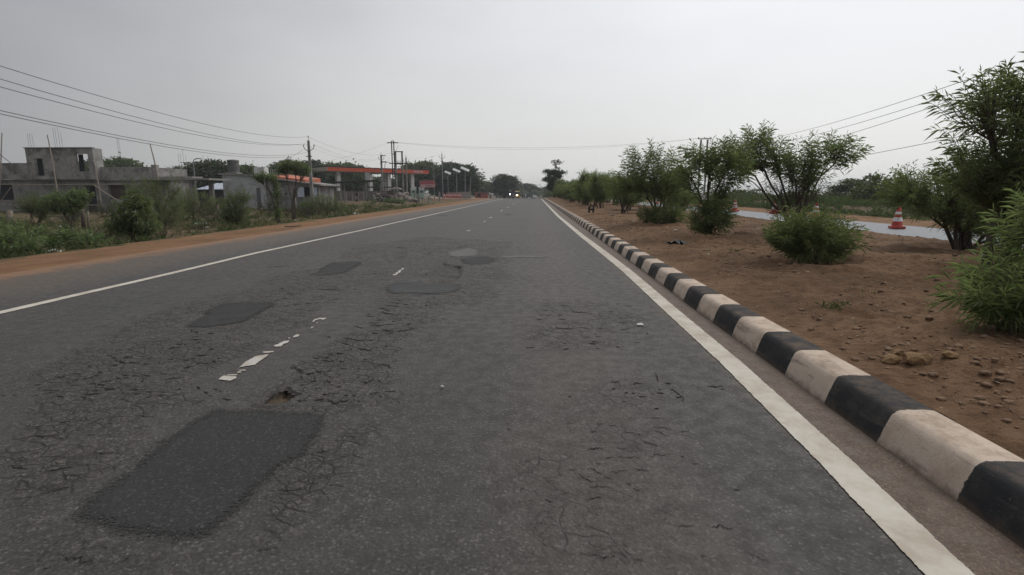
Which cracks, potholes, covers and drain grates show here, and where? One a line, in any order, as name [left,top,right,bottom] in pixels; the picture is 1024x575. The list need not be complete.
crack [291,292,465,404]
pothole [252,385,309,409]
crack [33,329,231,403]
crack [546,375,698,502]
crack [561,303,648,349]
